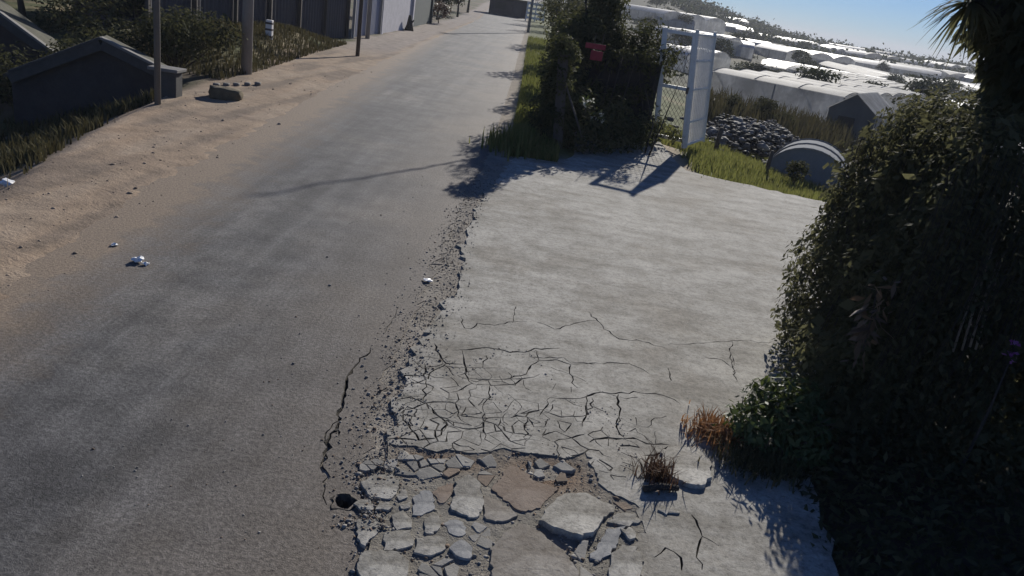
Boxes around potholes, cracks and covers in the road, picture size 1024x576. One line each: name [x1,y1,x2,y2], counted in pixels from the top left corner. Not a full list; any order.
crack [390,345,676,480]
pothole [330,493,358,511]
crack [655,516,714,571]
crack [319,350,371,505]
pothole [369,444,645,576]
